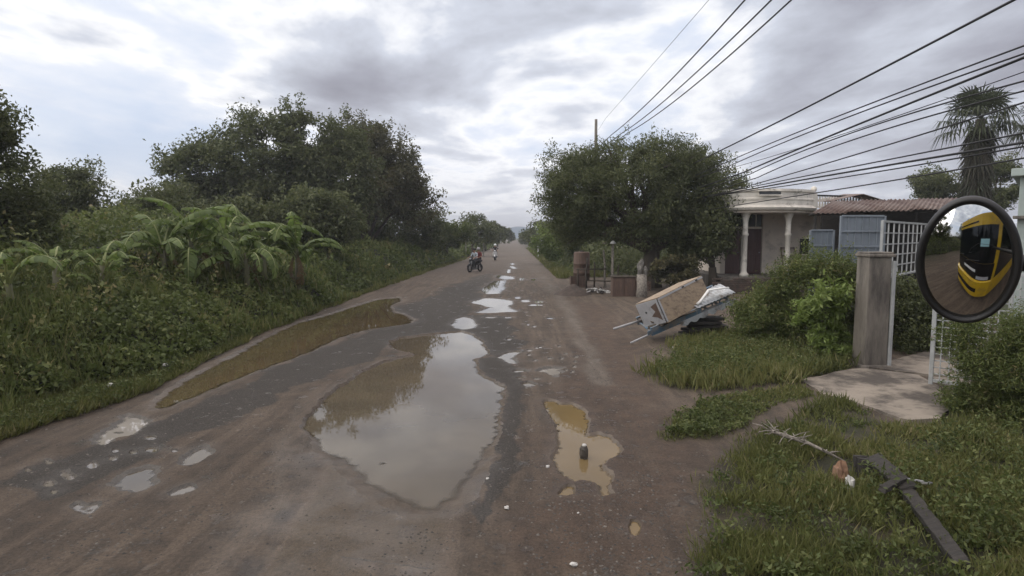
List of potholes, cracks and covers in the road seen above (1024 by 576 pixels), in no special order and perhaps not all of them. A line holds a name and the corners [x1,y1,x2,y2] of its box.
pothole [628,519,642,536]
pothole [541,398,624,496]
pothole [106,464,161,493]
pothole [299,330,507,518]
pothole [88,413,154,445]
